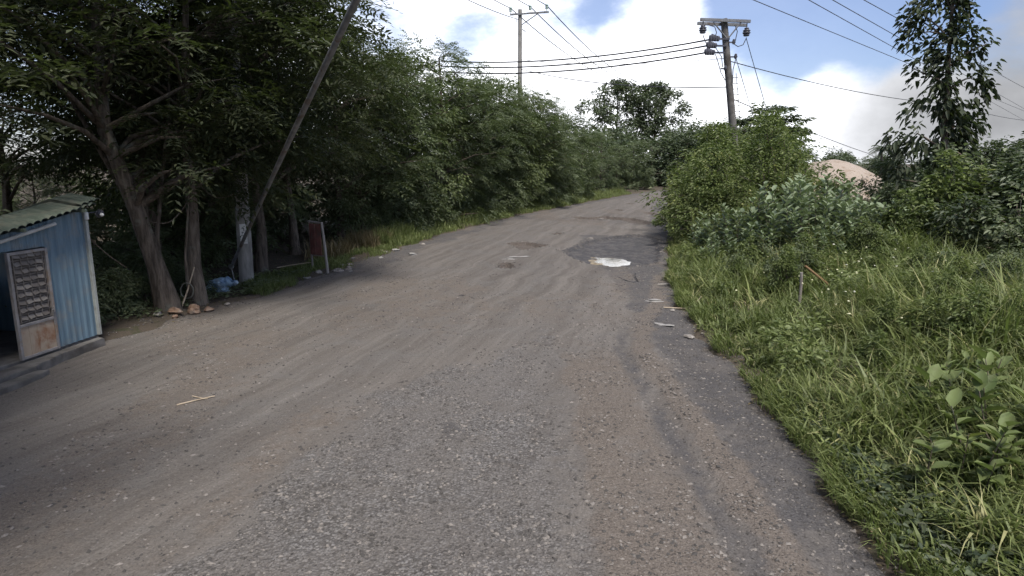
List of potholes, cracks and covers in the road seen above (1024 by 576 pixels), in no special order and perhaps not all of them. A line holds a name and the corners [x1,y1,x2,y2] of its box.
pothole [562,234,662,267]
pothole [507,242,548,250]
